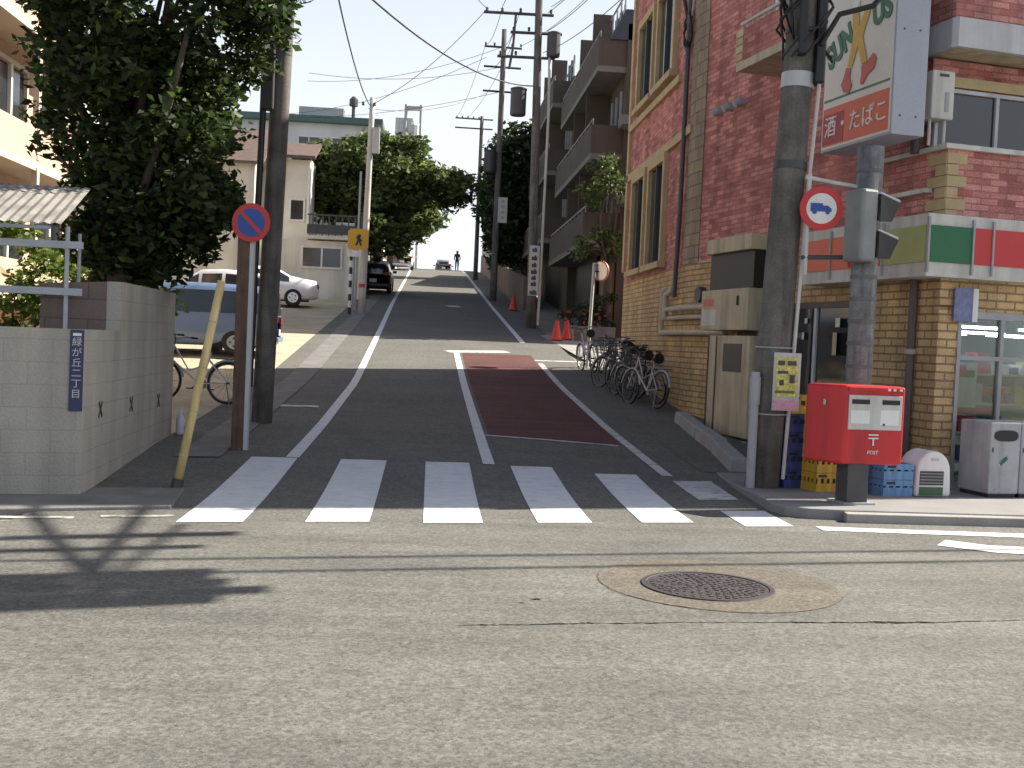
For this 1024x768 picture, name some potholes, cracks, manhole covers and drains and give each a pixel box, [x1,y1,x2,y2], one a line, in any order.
manhole cover [597,560,842,613]
